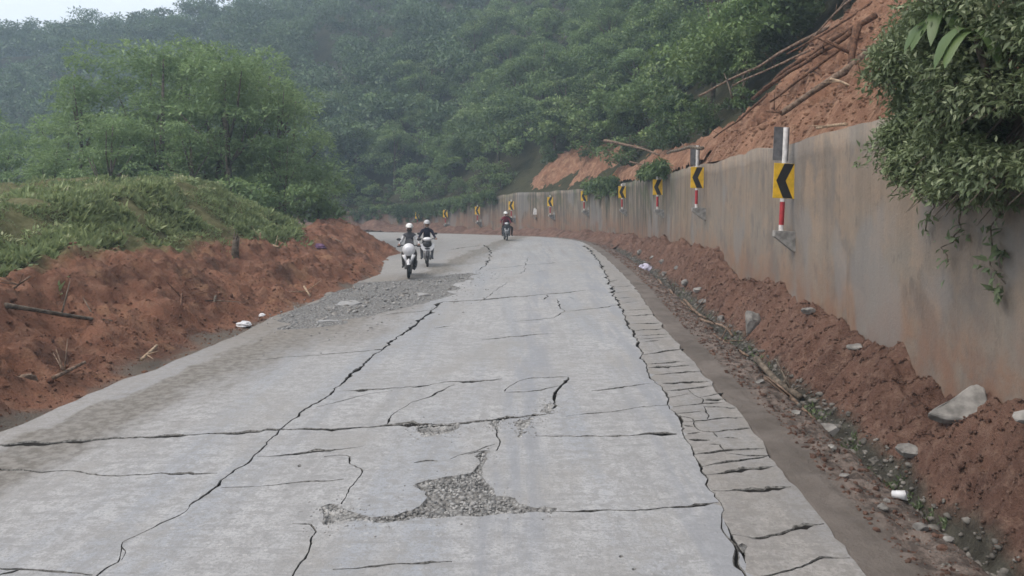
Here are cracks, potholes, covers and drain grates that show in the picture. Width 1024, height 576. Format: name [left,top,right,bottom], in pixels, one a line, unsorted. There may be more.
crack [764,556,850,576]
crack [292,523,452,576]
crack [317,280,791,492]
crack [0,568,92,576]
crack [448,245,619,340]
crack [732,522,824,539]
pothole [363,448,563,530]
crack [0,446,363,504]
